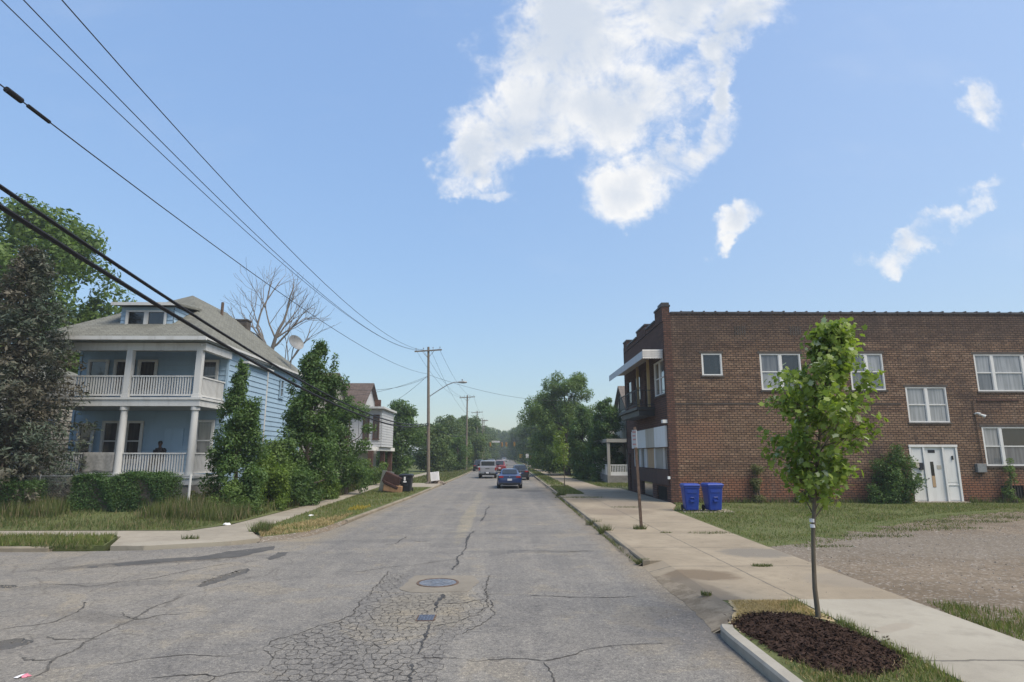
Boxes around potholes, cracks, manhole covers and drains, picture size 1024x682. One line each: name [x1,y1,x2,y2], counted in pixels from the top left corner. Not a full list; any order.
crack [421,643,659,682]
crack [6,562,240,677]
manhole cover [399,575,479,593]
crack [115,559,496,682]
